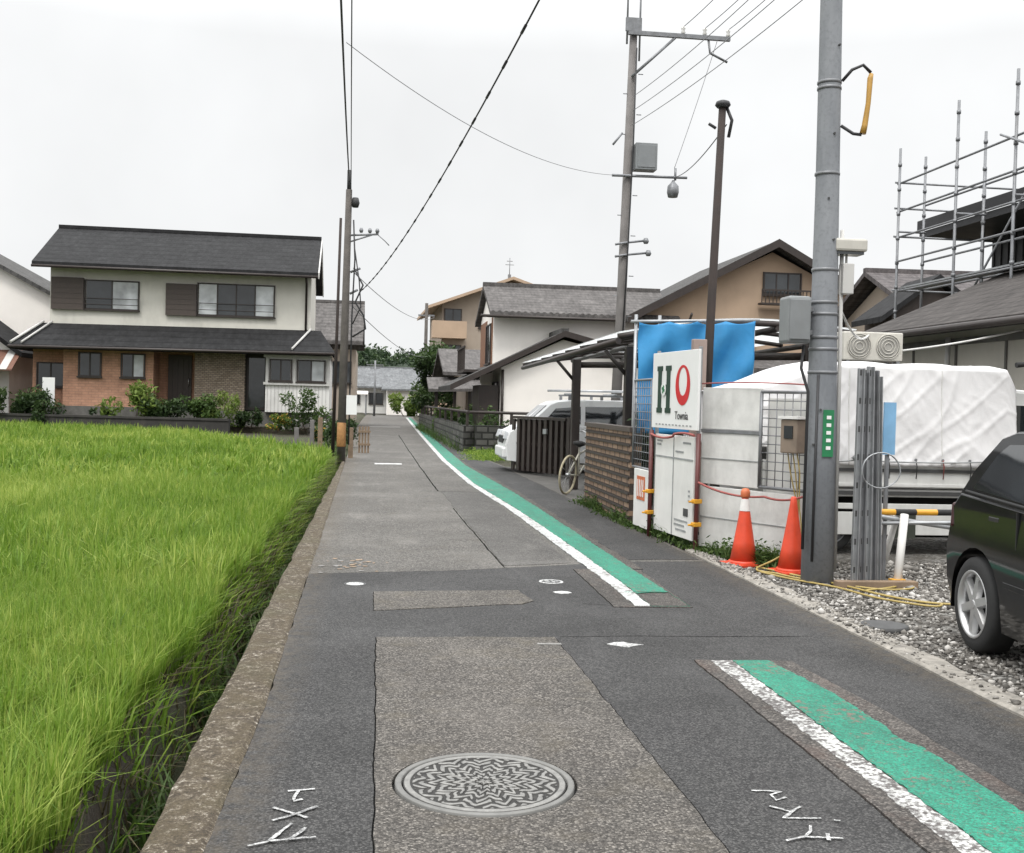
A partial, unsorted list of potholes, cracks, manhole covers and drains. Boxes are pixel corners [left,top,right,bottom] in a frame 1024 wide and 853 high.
manhole cover [392,753,577,818]
